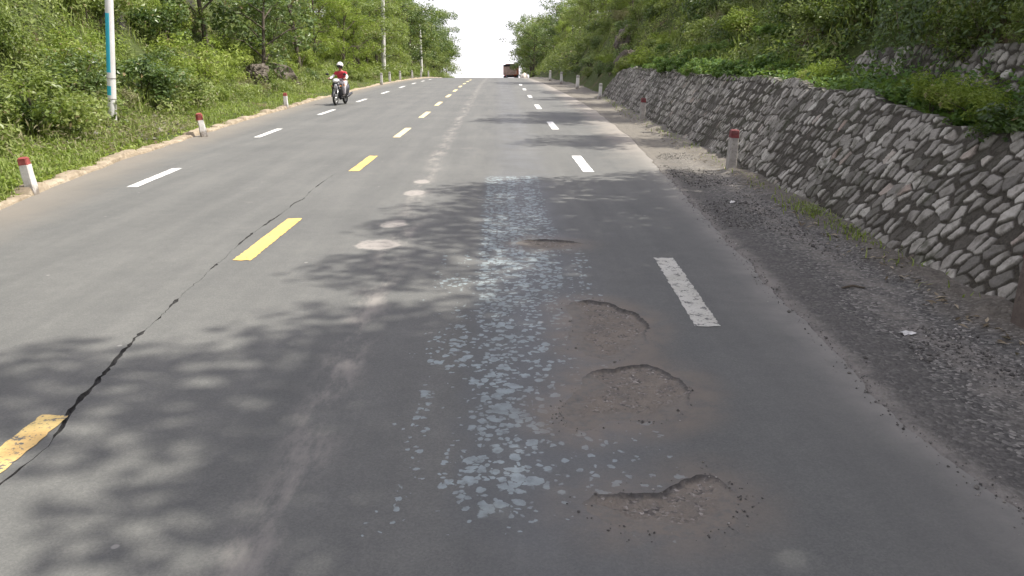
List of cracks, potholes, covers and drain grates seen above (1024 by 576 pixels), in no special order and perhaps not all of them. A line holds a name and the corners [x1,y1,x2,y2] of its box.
pothole [565,300,649,361]
pothole [517,239,584,250]
pothole [582,474,744,538]
crack [0,176,332,485]
pothole [558,364,691,431]
